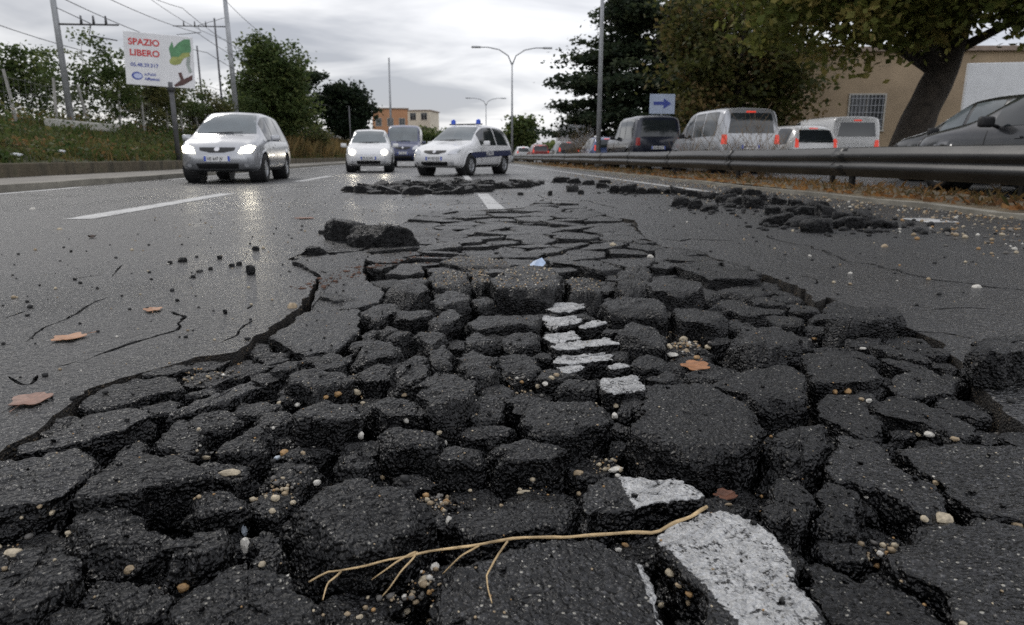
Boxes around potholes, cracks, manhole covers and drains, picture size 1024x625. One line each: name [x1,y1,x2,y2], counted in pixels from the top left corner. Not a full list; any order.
crack [4,297,187,367]
crack [901,331,976,340]
crack [222,306,254,342]
crack [9,375,38,385]
crack [761,234,1021,290]
